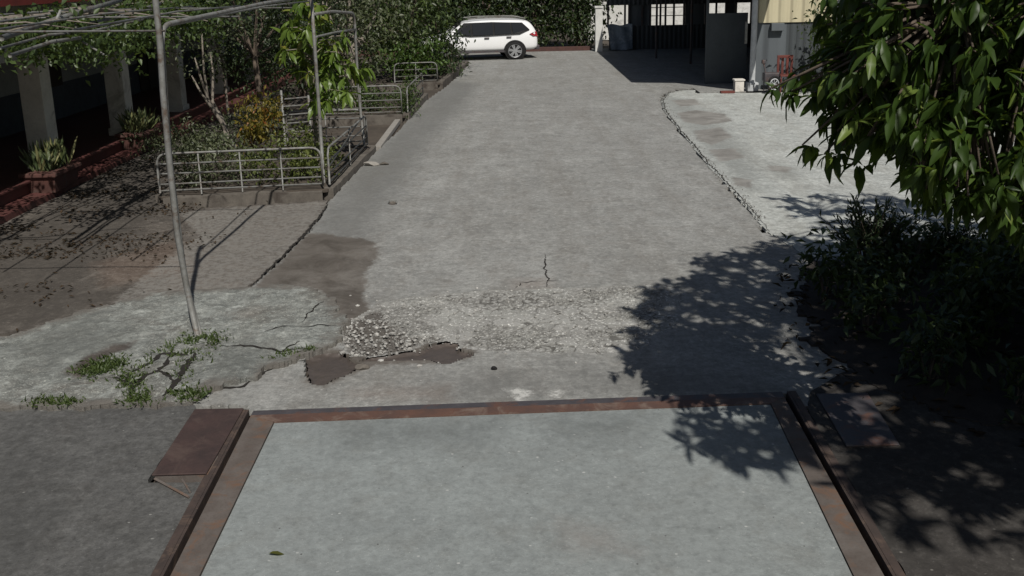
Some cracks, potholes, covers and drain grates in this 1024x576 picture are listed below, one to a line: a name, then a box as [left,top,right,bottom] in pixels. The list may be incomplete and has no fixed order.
pothole [306,353,356,386]
pothole [363,343,473,364]
crack [115,199,683,400]
